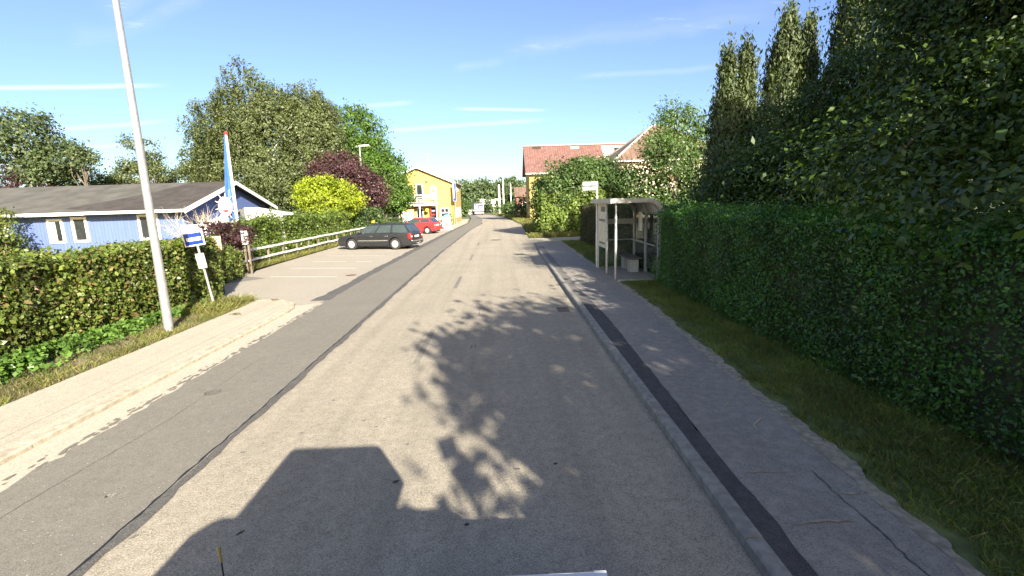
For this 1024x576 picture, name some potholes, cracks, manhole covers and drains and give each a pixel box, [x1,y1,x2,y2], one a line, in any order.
crack [791,471,930,576]
